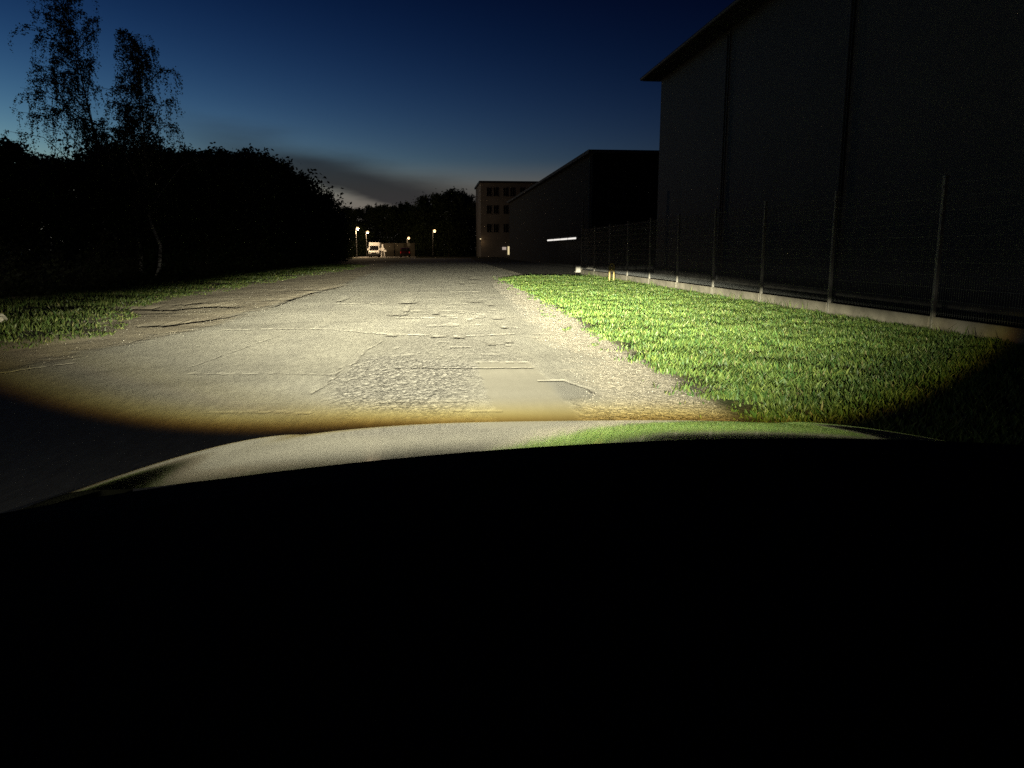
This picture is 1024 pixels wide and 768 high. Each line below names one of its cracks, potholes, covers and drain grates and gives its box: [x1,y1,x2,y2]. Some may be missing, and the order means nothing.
crack [221,303,596,394]
